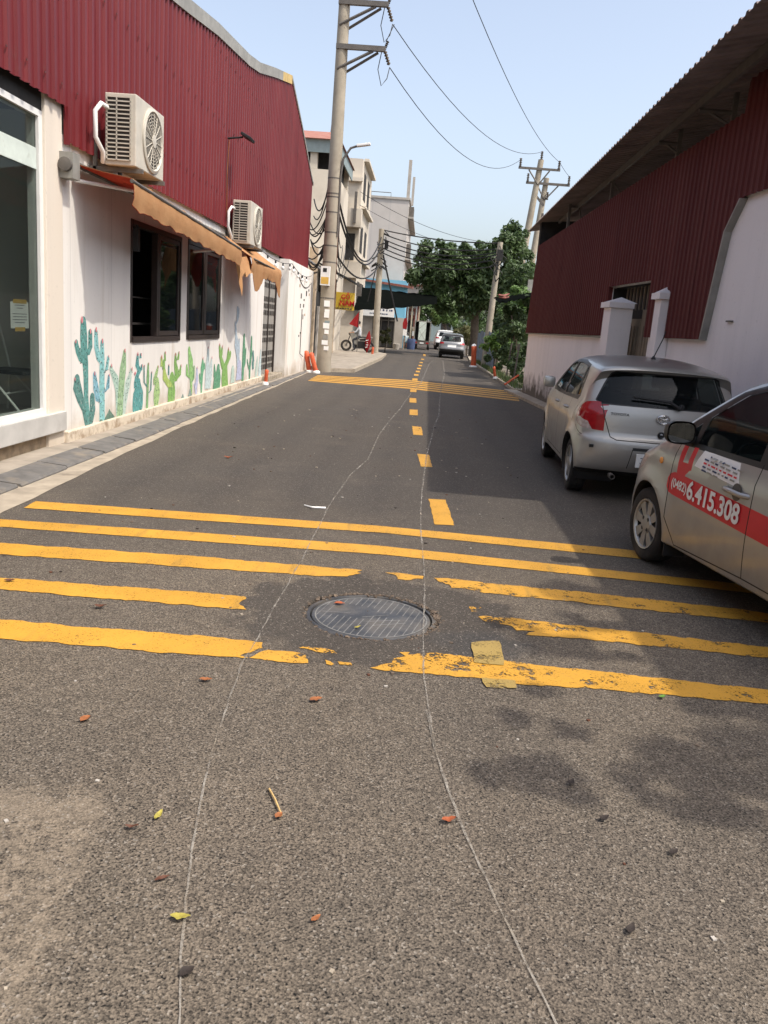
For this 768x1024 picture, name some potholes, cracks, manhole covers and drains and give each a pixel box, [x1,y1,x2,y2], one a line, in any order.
manhole cover [302,592,445,641]
